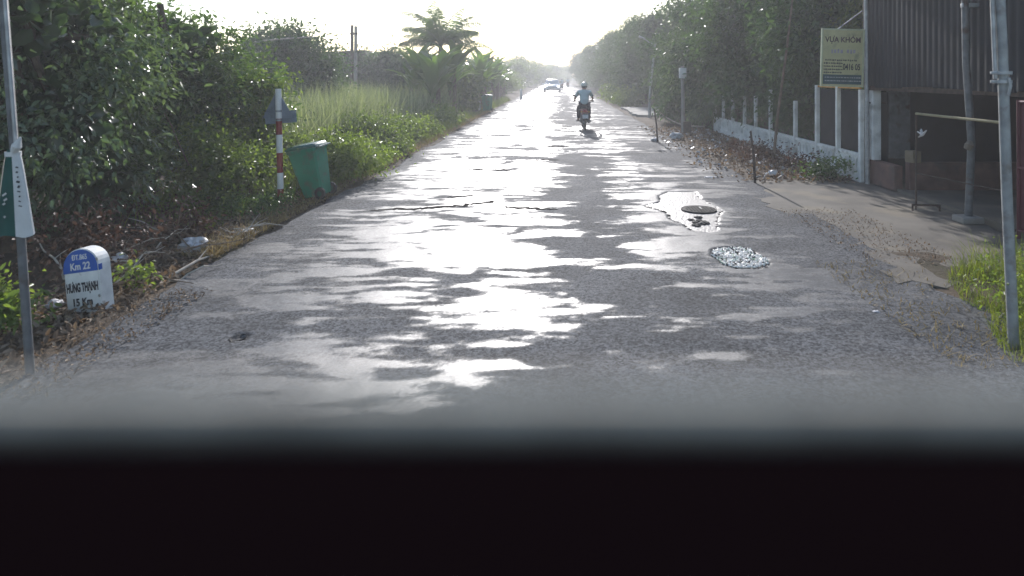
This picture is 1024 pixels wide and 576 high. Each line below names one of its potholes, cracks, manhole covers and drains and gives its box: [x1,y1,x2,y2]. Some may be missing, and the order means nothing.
manhole cover [681,205,717,214]
crack [370,194,556,211]
pothole [711,246,771,269]
pothole [645,192,723,232]
